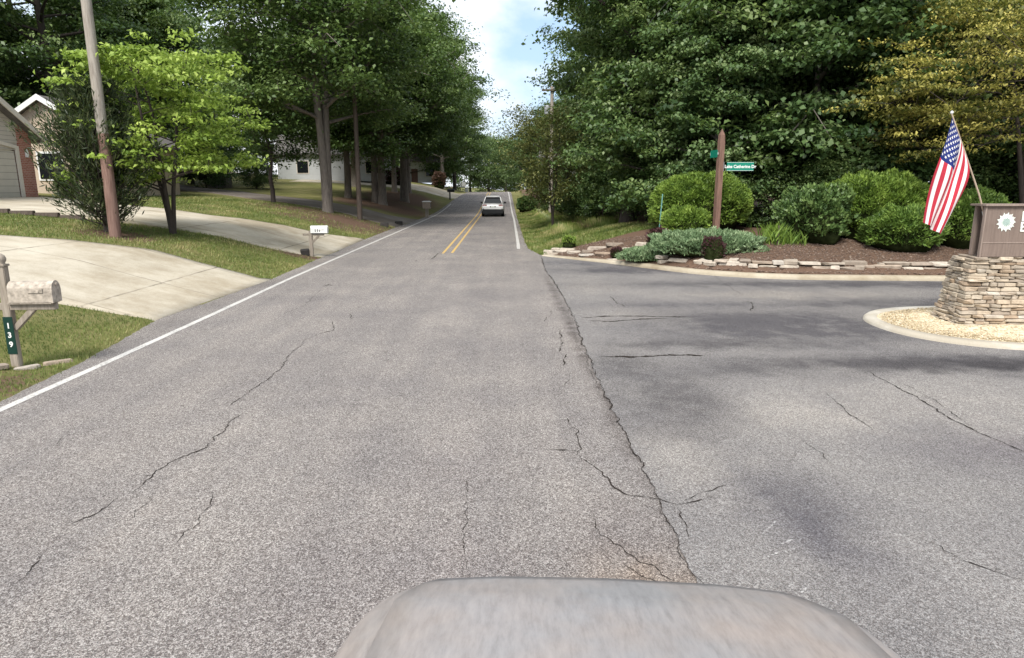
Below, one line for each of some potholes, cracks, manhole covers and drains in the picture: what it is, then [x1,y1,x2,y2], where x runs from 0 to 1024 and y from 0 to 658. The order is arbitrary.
crack [71,292,395,524]
crack [545,417,724,536]
crack [582,296,680,322]
crack [595,520,670,581]
crack [872,373,1023,451]
